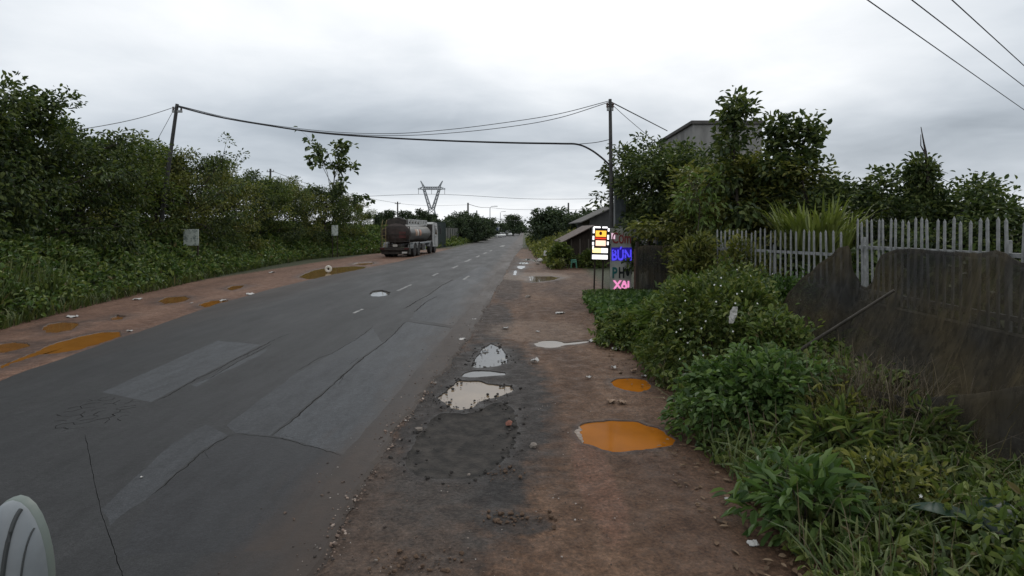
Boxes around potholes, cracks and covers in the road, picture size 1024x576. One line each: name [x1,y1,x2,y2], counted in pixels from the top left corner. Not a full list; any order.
pothole [611,378,651,392]
pothole [0,331,122,369]
pothole [299,266,367,279]
pothole [574,420,676,452]
pothole [438,380,514,410]
pothole [534,340,589,348]
pothole [42,322,79,333]
crack [55,397,141,576]
pothole [158,296,189,304]
pothole [471,343,508,368]
